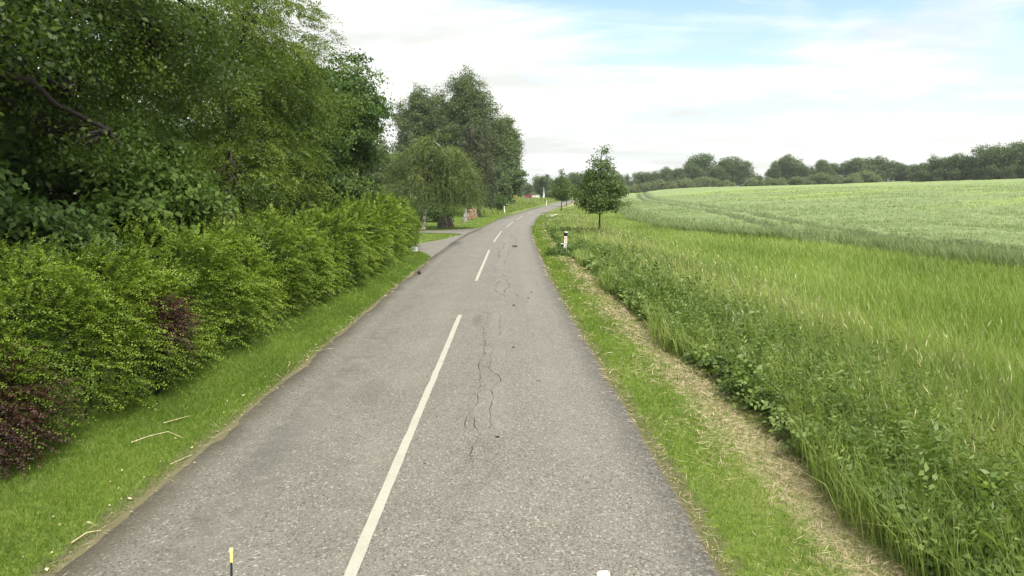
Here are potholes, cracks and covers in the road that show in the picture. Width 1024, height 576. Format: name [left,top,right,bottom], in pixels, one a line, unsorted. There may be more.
crack [463,312,501,463]
